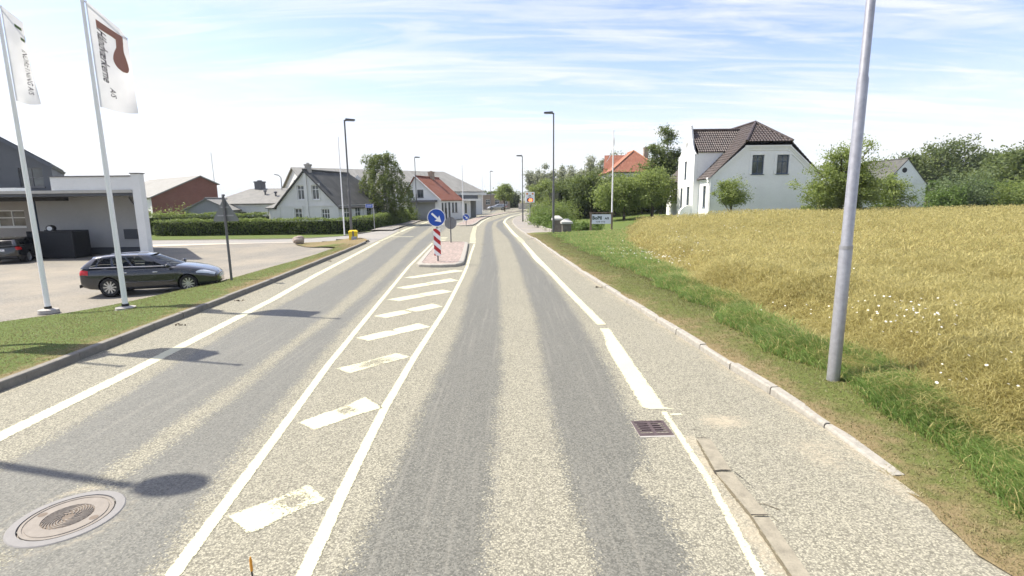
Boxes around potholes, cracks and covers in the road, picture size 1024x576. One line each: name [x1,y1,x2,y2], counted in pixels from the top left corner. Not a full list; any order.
drain grate [631,420,675,438]
manhole cover [3,491,126,548]
